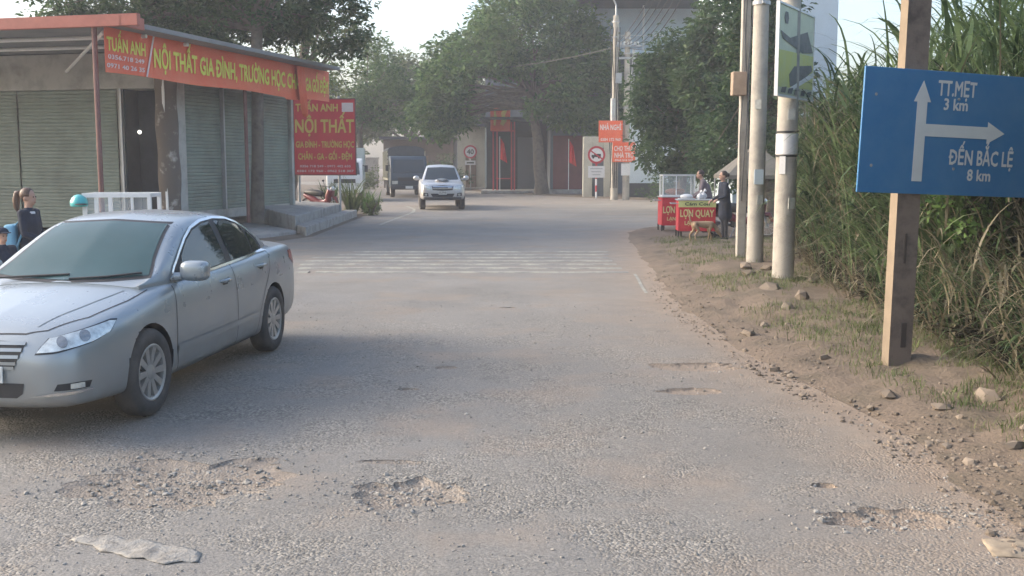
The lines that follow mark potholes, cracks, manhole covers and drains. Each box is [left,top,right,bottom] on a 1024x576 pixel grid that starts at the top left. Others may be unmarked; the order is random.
pothole [655,387,723,395]
pothole [57,458,299,511]
pothole [351,475,470,510]
pothole [647,363,742,372]
pothole [816,507,956,531]
